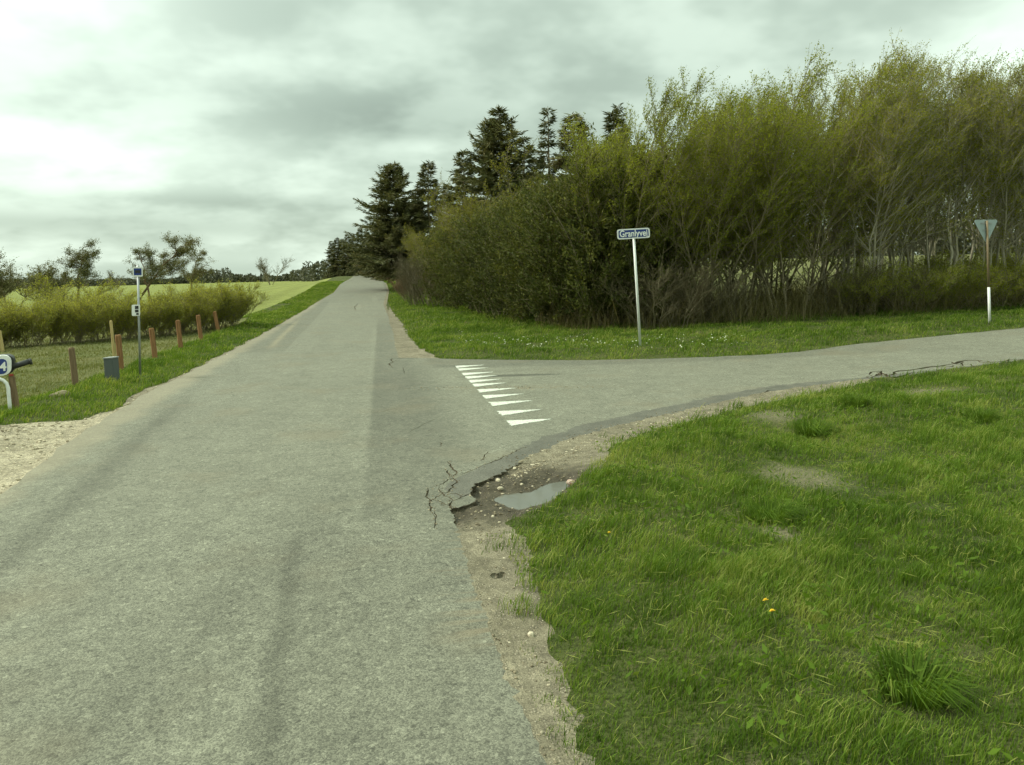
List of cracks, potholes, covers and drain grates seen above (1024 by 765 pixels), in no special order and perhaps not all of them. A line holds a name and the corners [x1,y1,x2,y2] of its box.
pothole [450,462,580,531]
crack [425,442,517,529]
crack [867,359,1023,378]
